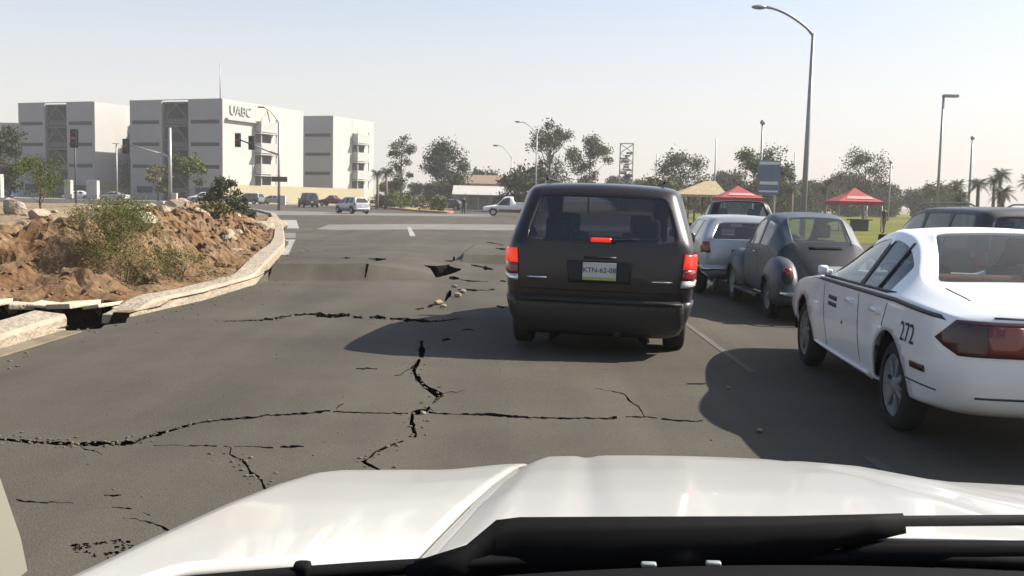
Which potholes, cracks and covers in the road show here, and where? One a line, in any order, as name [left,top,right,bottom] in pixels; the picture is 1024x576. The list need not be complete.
pothole [424,257,461,280]
crack [0,340,703,489]
crack [226,242,506,341]
crack [104,494,169,531]
